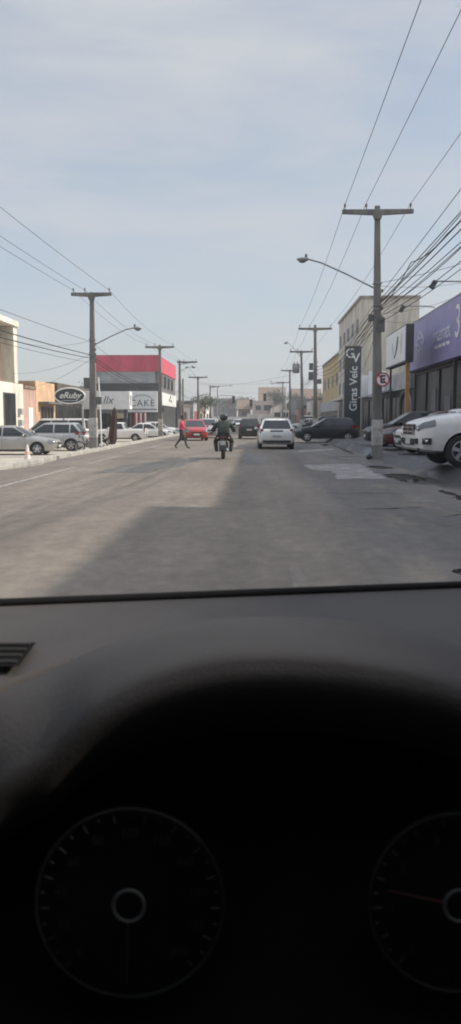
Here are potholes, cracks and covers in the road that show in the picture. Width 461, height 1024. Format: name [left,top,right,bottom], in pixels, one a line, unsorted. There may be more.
pothole [383,474,425,482]
